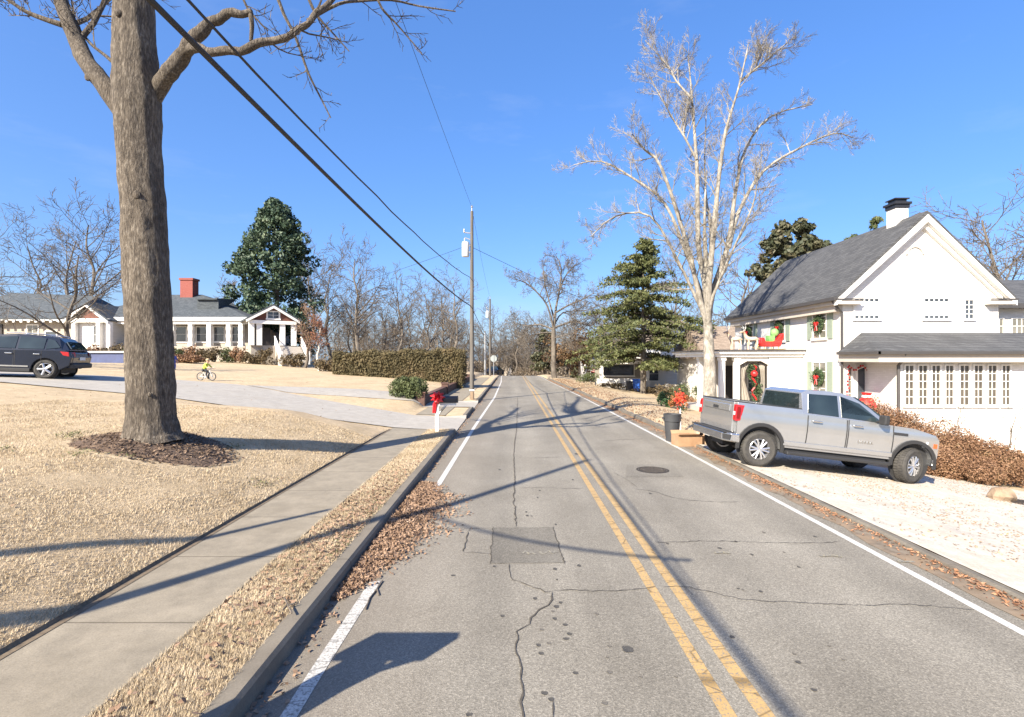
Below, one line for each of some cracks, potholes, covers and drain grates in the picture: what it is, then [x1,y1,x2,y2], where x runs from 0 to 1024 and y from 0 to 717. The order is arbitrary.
crack [509,565,974,717]
manhole cover [636,466,669,474]
crack [513,399,553,524]
